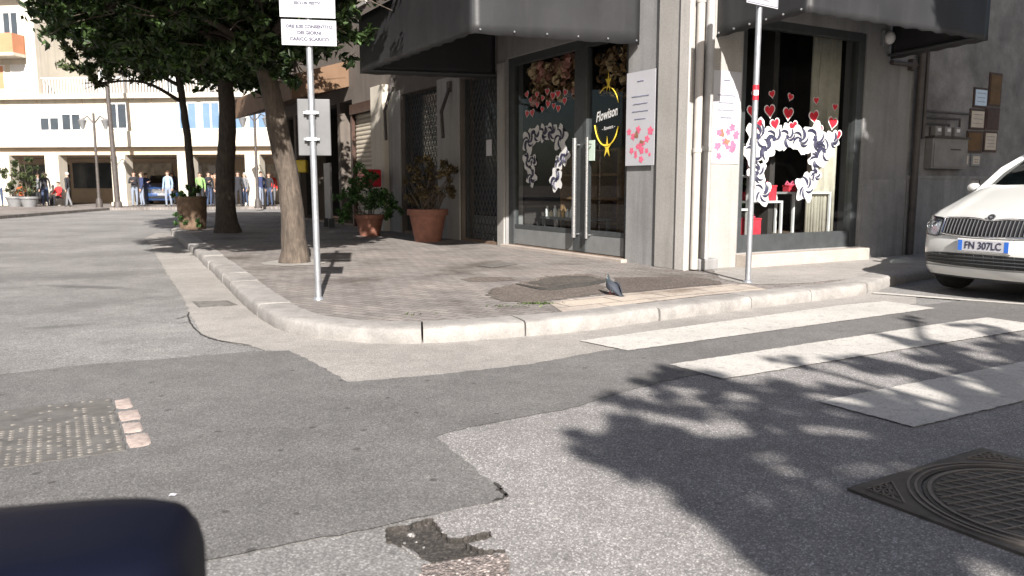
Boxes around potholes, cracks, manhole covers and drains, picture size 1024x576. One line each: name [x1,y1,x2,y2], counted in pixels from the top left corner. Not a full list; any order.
pothole [385,518,506,564]
manhole cover [847,447,1024,557]
crack [178,312,248,345]
manhole cover [0,398,151,469]
